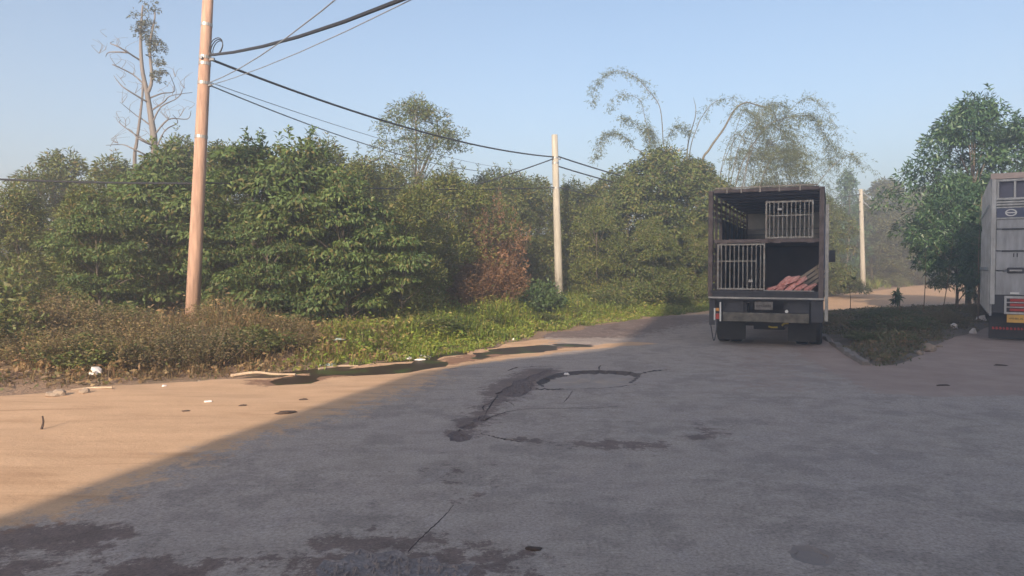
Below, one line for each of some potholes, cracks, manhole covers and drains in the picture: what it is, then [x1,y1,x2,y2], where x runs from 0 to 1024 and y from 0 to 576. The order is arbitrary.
crack [408,506,453,552]
pothole [787,545,837,566]
crack [458,365,661,442]
